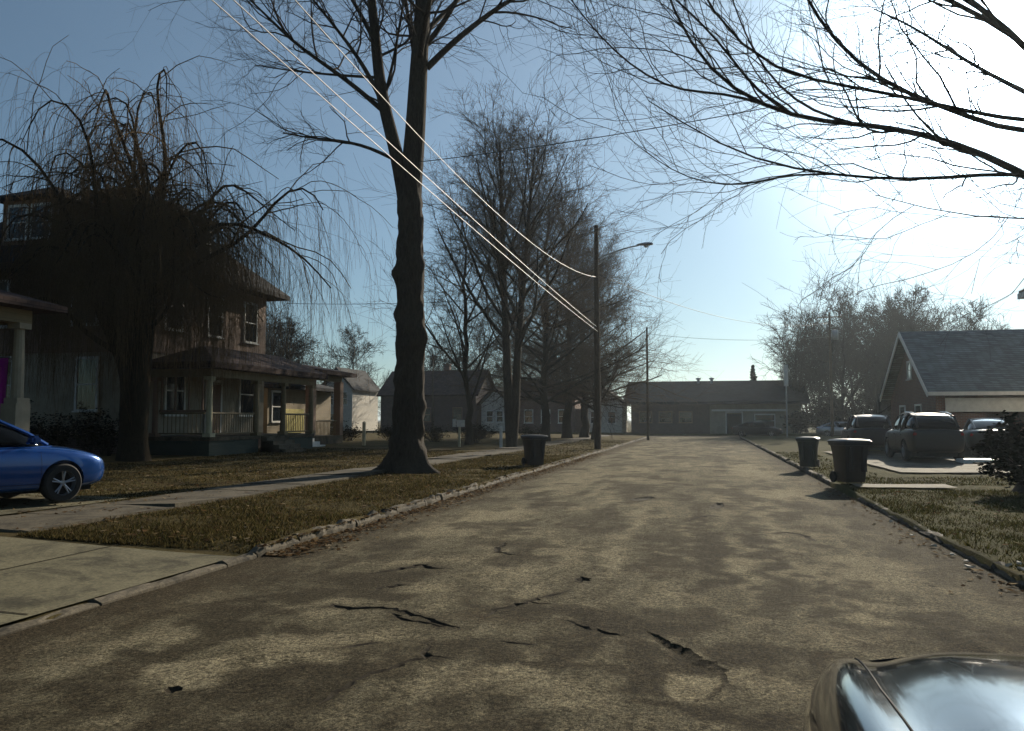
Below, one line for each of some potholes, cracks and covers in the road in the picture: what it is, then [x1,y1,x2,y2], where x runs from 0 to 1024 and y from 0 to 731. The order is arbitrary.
crack [494,542,518,555]
crack [773,532,814,540]
crack [485,591,625,636]
pothole [164,686,183,694]
crack [318,564,460,705]
